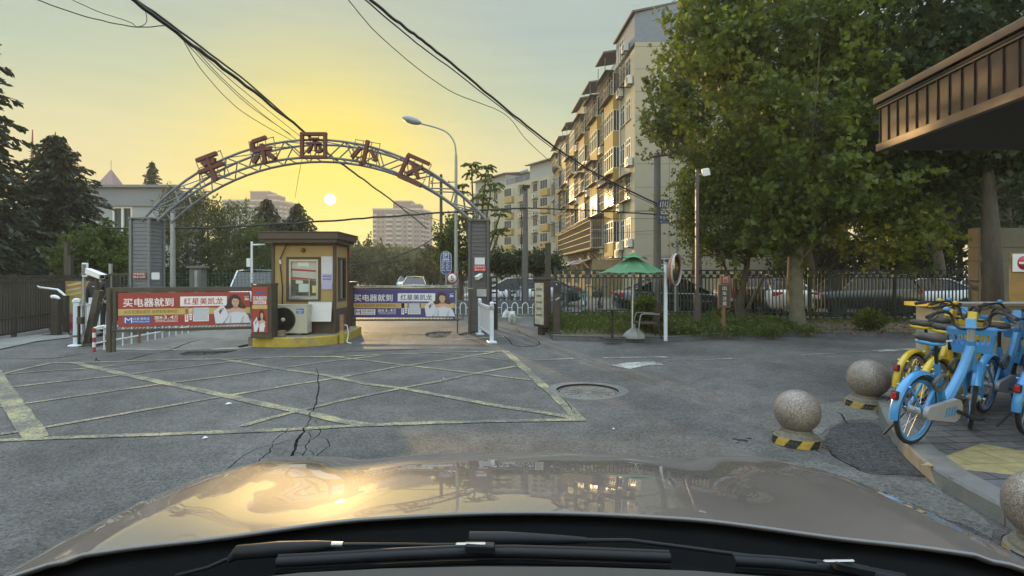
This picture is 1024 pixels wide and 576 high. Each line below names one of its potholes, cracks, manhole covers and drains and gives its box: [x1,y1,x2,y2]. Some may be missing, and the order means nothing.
manhole cover [548,382,629,400]
crack [229,369,330,468]
